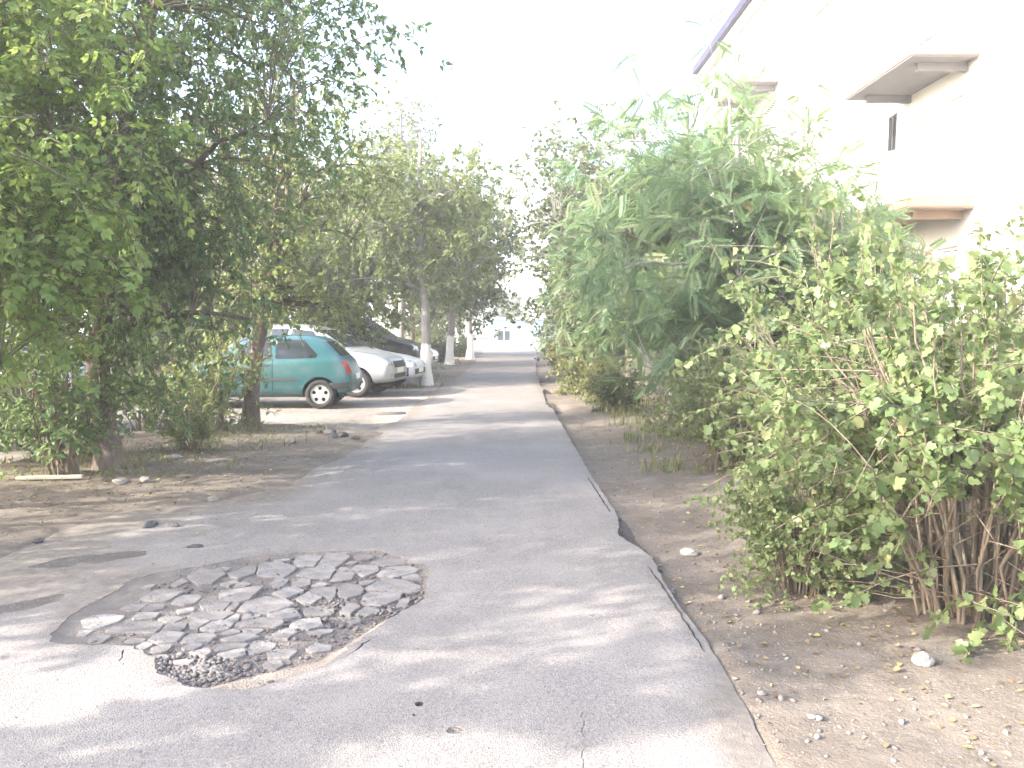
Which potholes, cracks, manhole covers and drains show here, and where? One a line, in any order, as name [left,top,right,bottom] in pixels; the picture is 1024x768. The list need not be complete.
crack [647,565,705,652]
pothole [30,551,147,568]
pothole [50,551,431,691]
